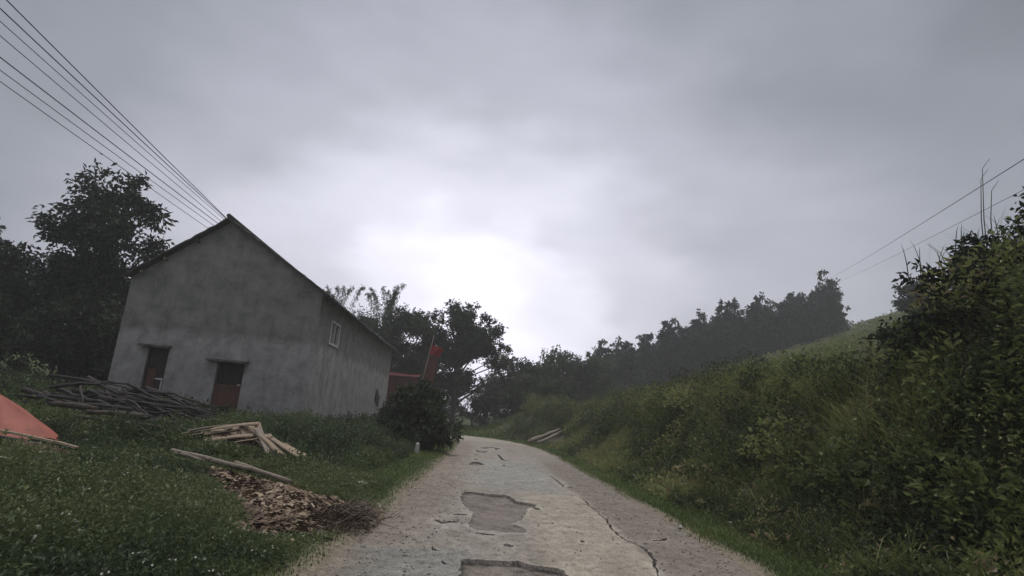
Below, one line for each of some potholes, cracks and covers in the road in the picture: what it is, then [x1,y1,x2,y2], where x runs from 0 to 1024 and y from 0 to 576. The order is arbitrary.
pothole [460,492,536,534]
pothole [458,556,568,576]
crack [550,476,668,576]
crack [473,447,508,461]
